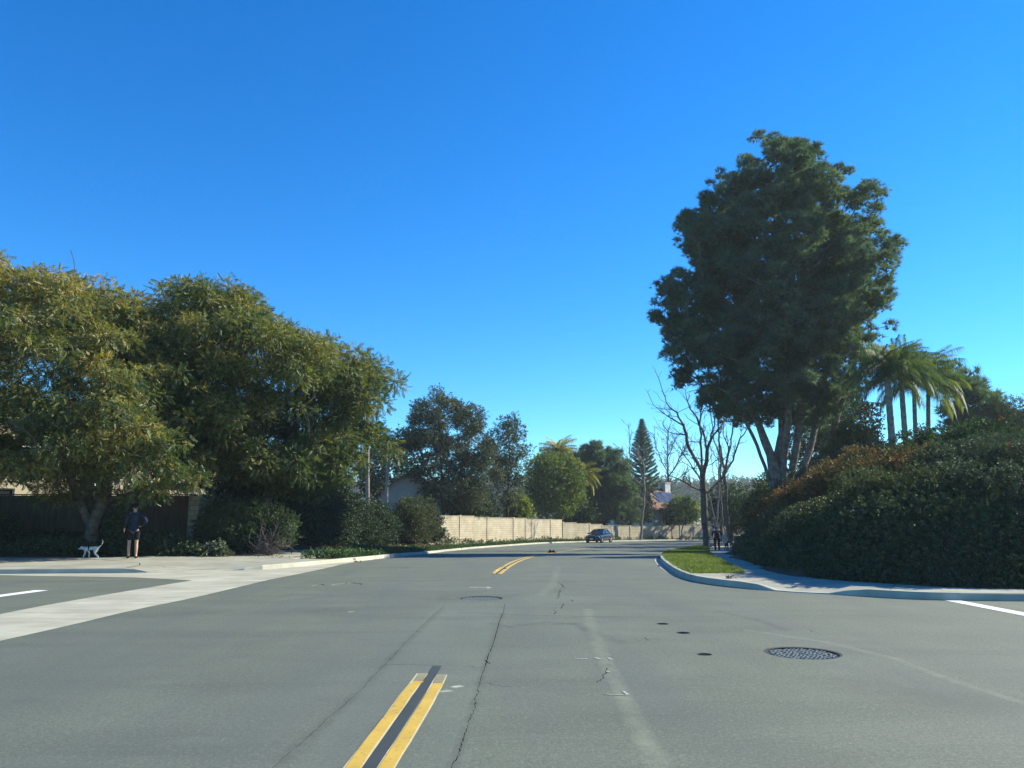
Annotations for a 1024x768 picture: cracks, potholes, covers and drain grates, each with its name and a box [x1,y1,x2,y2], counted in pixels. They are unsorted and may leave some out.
manhole cover [764,647,842,660]
crack [272,605,509,768]
